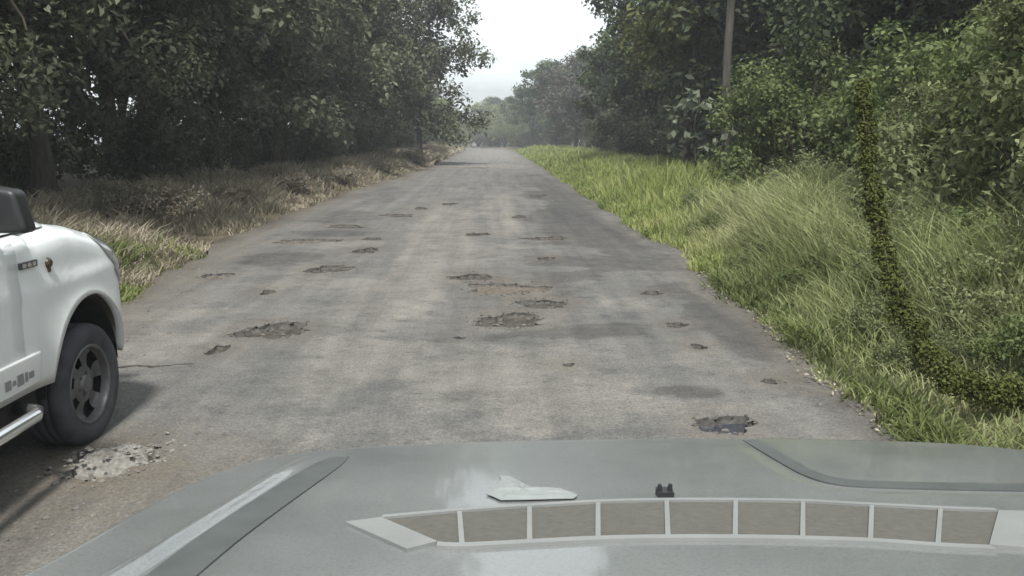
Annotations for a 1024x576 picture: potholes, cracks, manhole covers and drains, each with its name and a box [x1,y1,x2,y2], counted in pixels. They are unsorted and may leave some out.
pothole [227,320,311,340]
pothole [466,311,545,328]
pothole [59,432,187,483]
pothole [515,299,568,309]
pothole [203,344,231,355]
pothole [302,264,355,274]
pothole [691,414,758,435]
